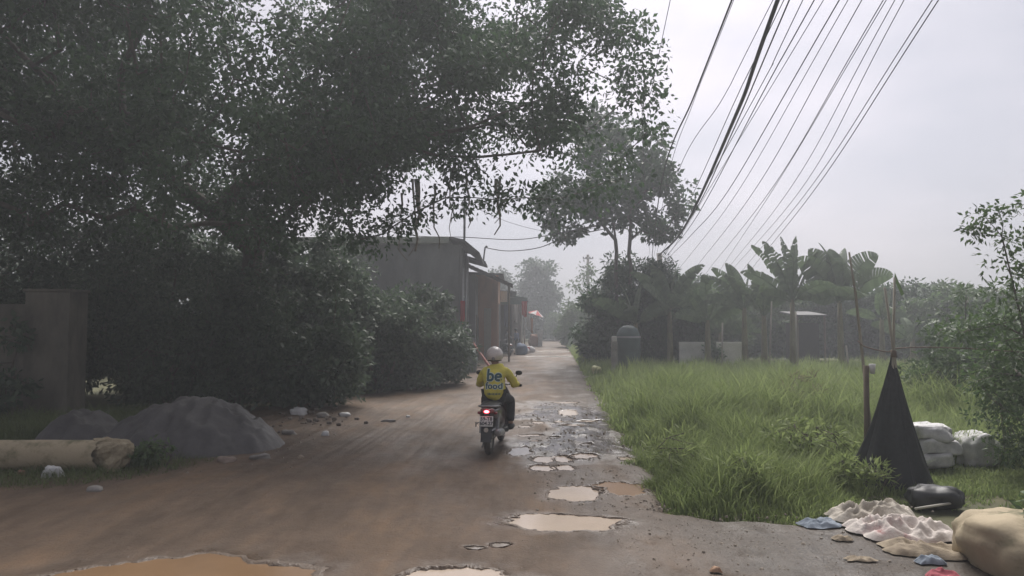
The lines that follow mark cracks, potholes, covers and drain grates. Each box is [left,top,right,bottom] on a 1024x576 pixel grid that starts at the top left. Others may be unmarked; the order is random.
pothole [550,454,577,463]
pothole [391,564,509,576]
pothole [531,456,556,464]
pothole [502,513,631,532]
pothole [590,480,648,497]
pothole [506,445,534,457]
pothole [30,551,328,576]
pothole [528,464,559,472]
pothole [545,485,609,502]
